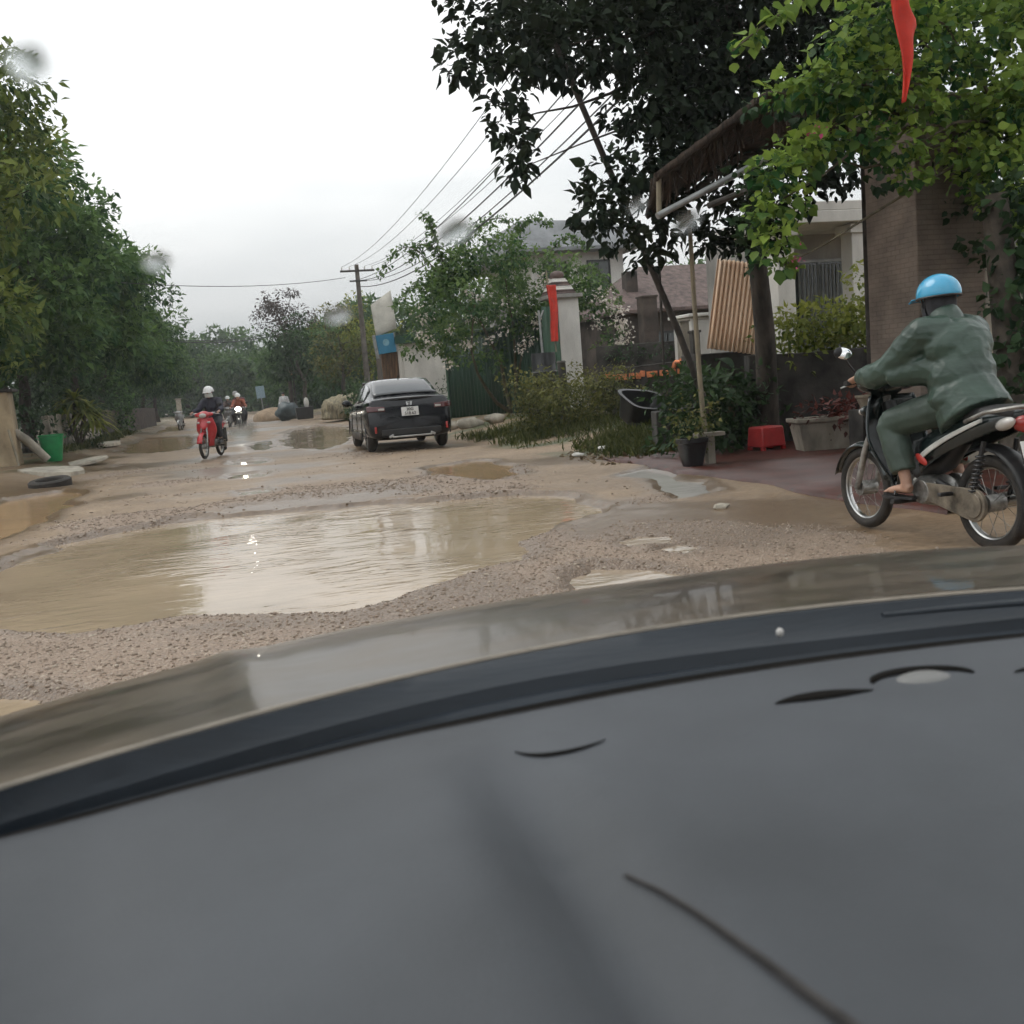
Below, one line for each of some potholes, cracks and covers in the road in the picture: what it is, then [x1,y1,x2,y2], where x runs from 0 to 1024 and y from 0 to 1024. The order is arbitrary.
pothole [555,558,693,591]
pothole [419,458,528,480]
pothole [613,466,726,499]
pothole [0,489,621,634]
pothole [113,435,198,454]
pothole [269,424,353,450]
